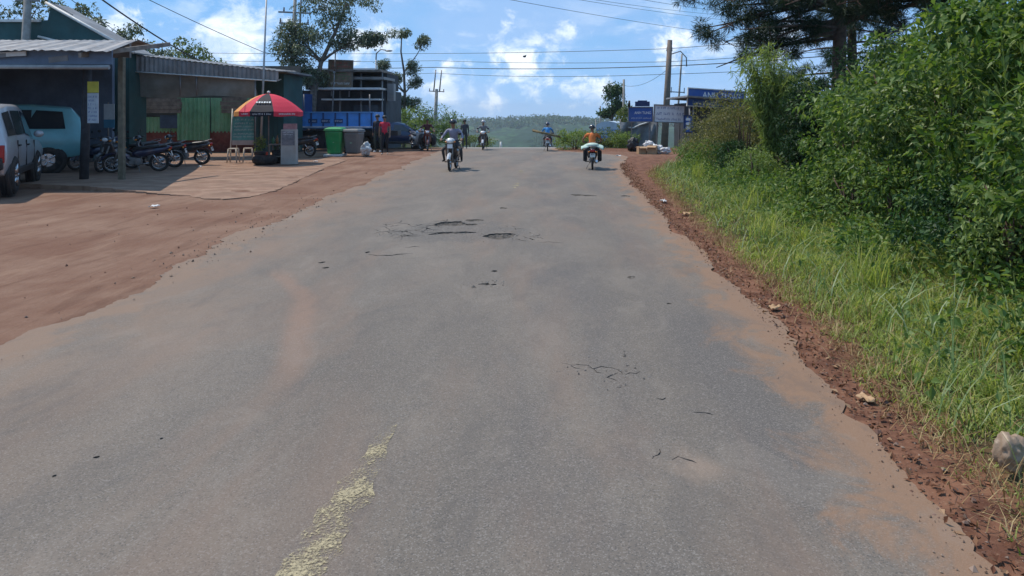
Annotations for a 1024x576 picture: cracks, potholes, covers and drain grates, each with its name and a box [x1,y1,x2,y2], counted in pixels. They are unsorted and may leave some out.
crack [565,363,640,381]
crack [365,219,448,256]
